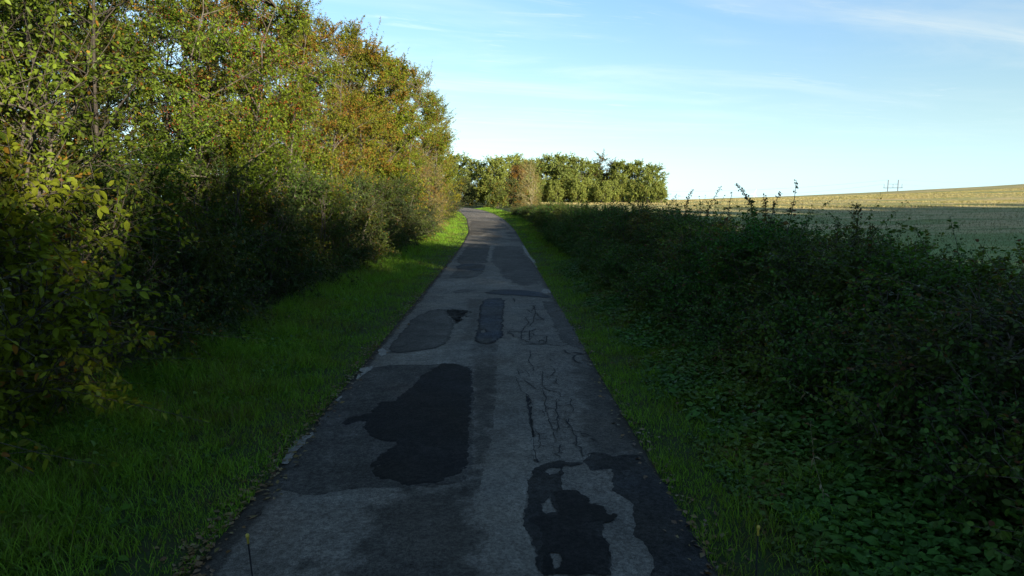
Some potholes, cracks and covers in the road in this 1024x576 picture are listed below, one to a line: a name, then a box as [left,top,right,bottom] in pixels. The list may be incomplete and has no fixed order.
crack [488,293,603,462]
